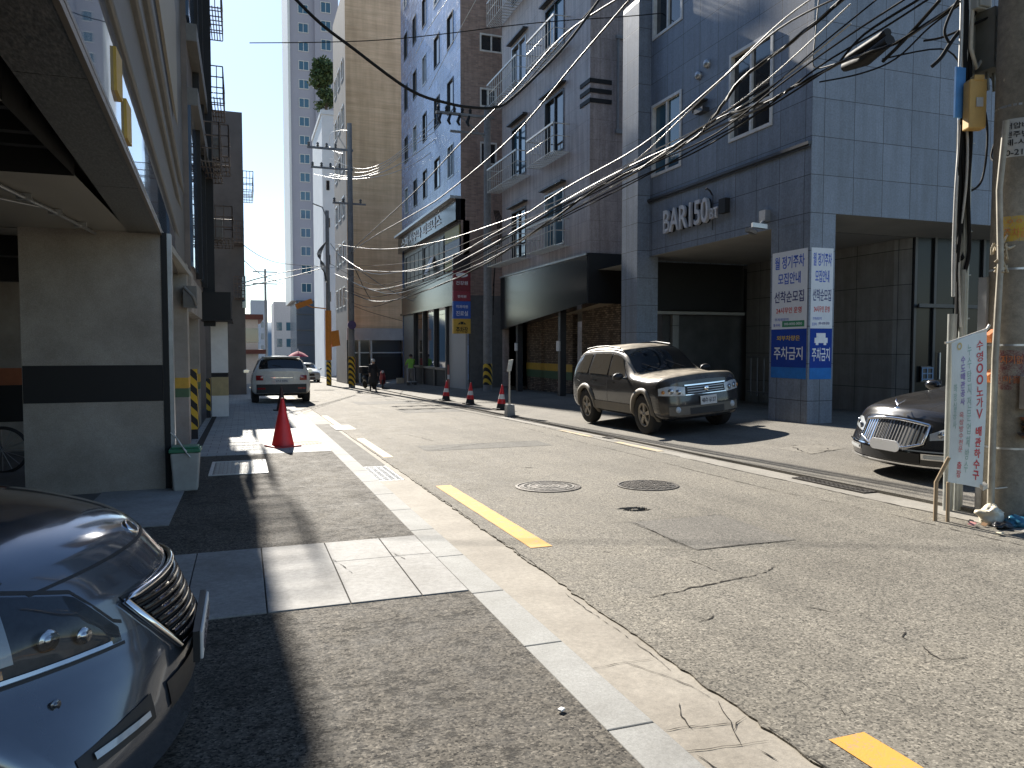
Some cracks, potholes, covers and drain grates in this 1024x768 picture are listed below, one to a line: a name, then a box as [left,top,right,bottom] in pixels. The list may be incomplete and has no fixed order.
manhole cover [617,480,679,491]
drain grate [792,476,876,494]
crack [669,701,829,768]
drain grate [364,466,404,481]
crack [406,420,1024,546]
crack [628,515,791,597]
manhole cover [515,481,581,493]
